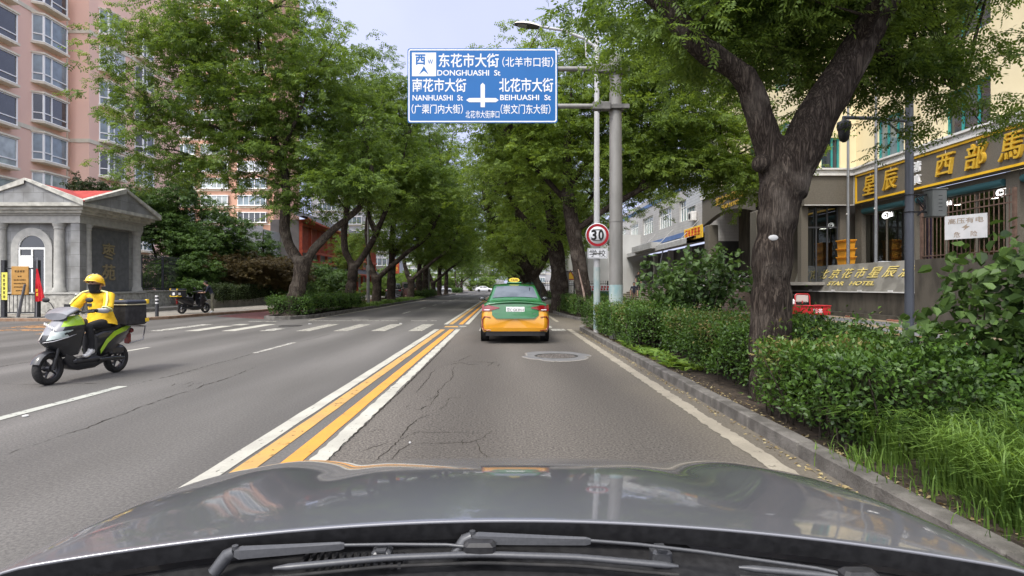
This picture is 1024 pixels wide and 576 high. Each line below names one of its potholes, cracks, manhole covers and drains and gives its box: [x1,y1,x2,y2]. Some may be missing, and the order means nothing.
crack [13,355,247,452]
manhole cover [522,351,591,362]
crack [366,358,493,462]
